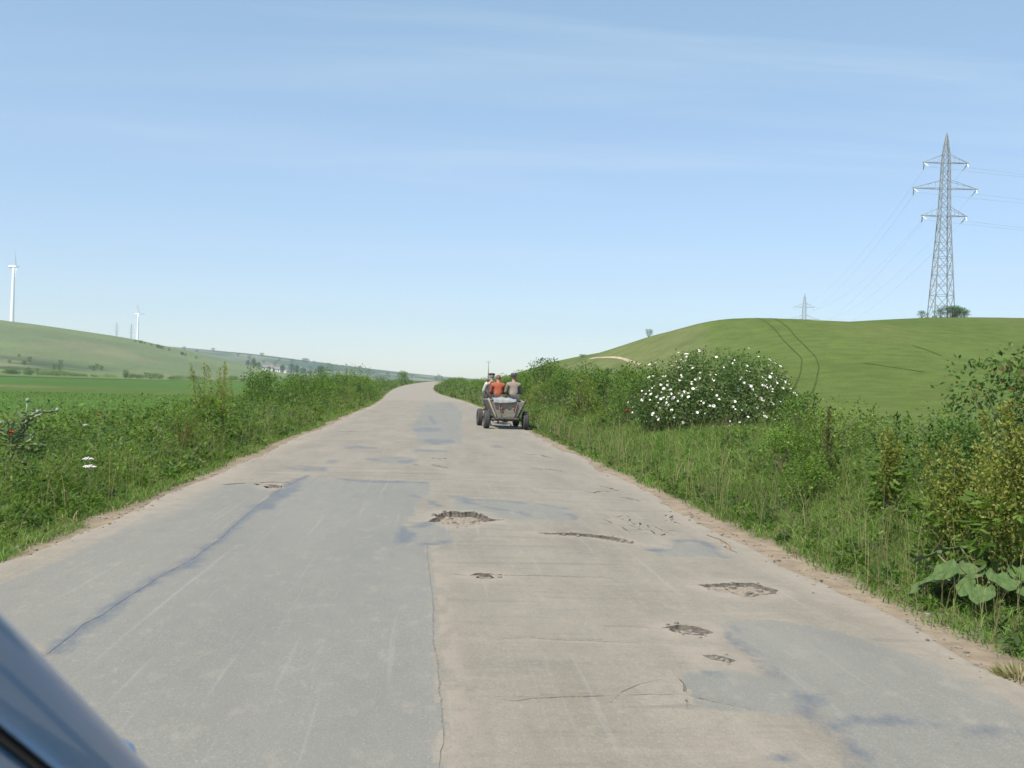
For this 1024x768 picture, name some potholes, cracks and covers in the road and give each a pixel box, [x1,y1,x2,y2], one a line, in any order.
pothole [426,510,504,528]
pothole [539,532,634,544]
crack [578,485,692,536]
crack [480,675,751,711]
pothole [464,572,502,580]
pothole [698,653,741,665]
pothole [695,581,782,598]
pothole [656,621,718,638]
